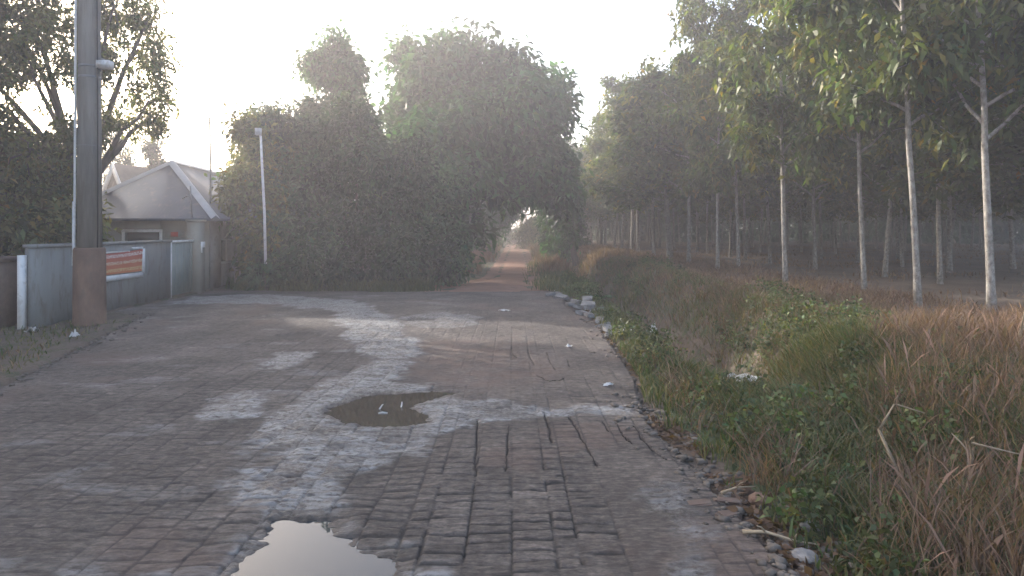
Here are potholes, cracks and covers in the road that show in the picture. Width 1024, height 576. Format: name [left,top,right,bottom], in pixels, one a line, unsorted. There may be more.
pothole [312,387,479,429]
crack [568,418,667,466]
pothole [212,506,416,576]
